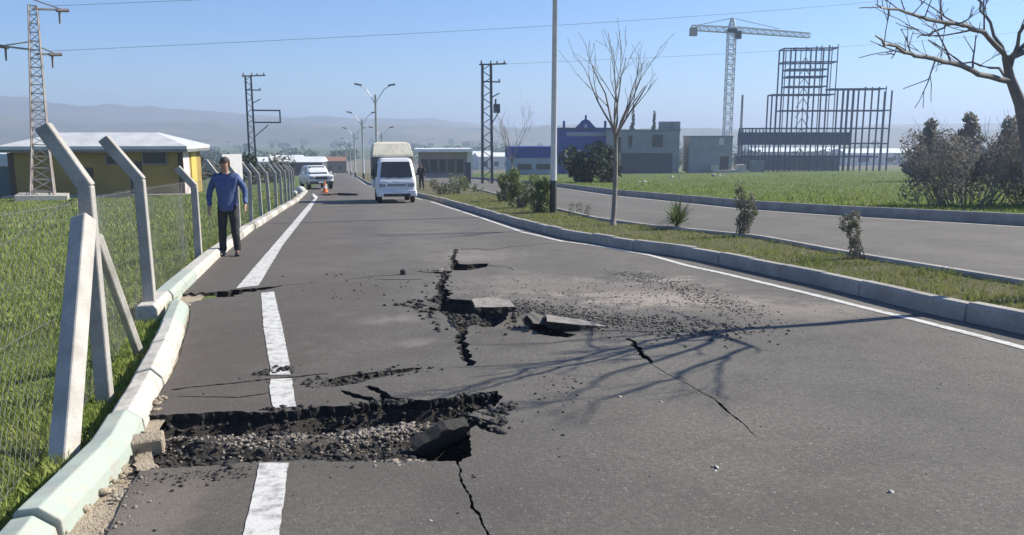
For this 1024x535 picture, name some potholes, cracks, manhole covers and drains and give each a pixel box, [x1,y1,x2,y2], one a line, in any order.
crack [625,338,755,435]
crack [458,465,490,535]
pothole [130,385,503,474]
